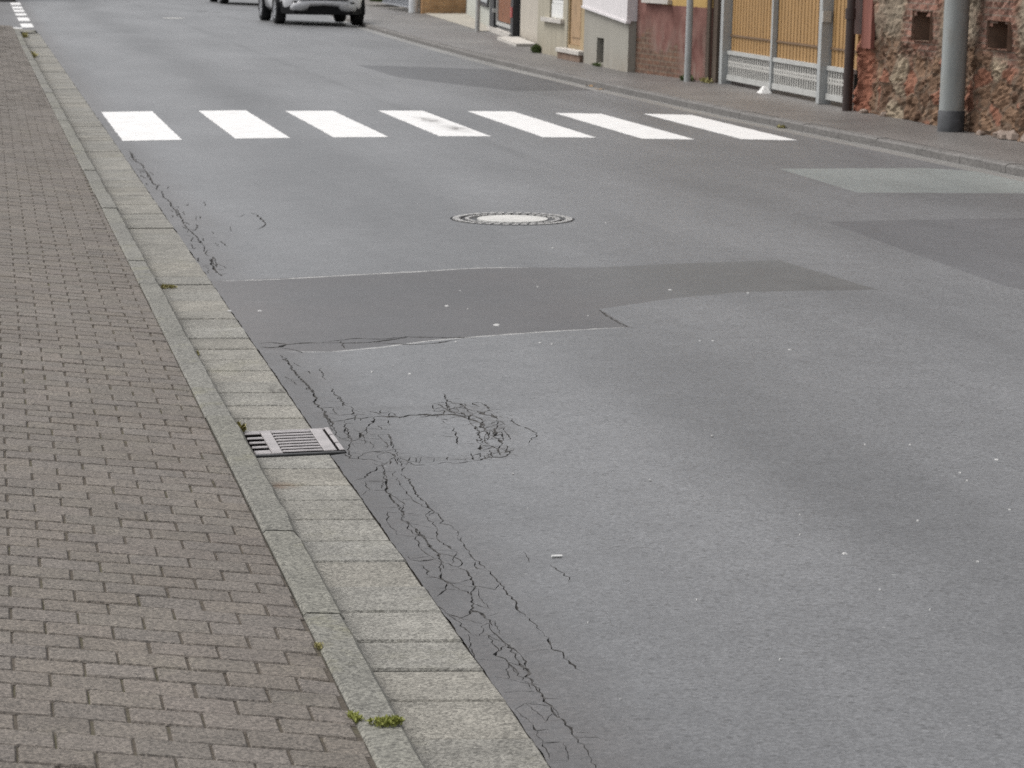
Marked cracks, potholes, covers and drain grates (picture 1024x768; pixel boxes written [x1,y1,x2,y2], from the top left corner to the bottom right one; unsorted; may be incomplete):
drain grate [243,427,346,459]
crack [260,337,597,768]
manhole cover [451,212,574,225]
crack [129,151,231,276]
